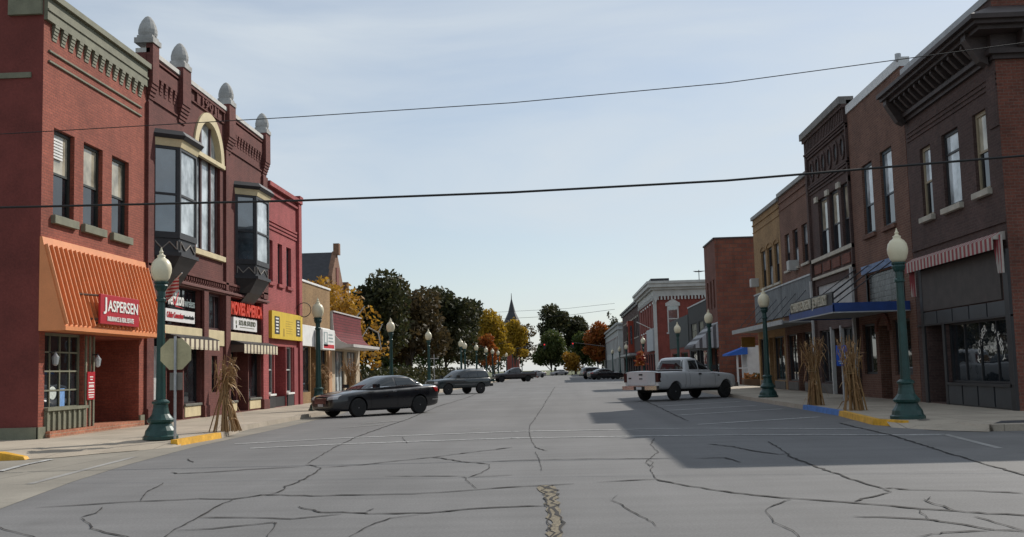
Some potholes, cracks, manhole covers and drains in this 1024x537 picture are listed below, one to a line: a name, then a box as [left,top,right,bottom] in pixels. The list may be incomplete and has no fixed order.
crack [48,387,574,537]
crack [602,438,1024,537]
